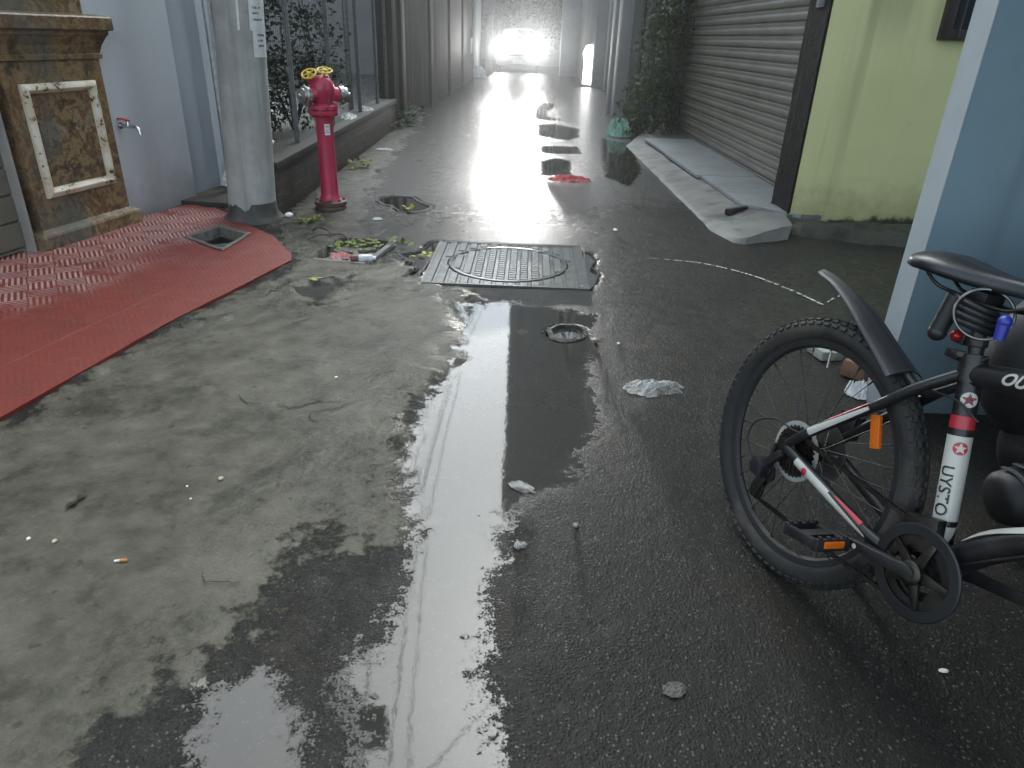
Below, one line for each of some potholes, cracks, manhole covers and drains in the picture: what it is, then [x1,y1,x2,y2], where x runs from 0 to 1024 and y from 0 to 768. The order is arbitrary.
manhole cover [421,241,590,291]
pothole [375,195,433,214]
crack [239,395,356,422]
